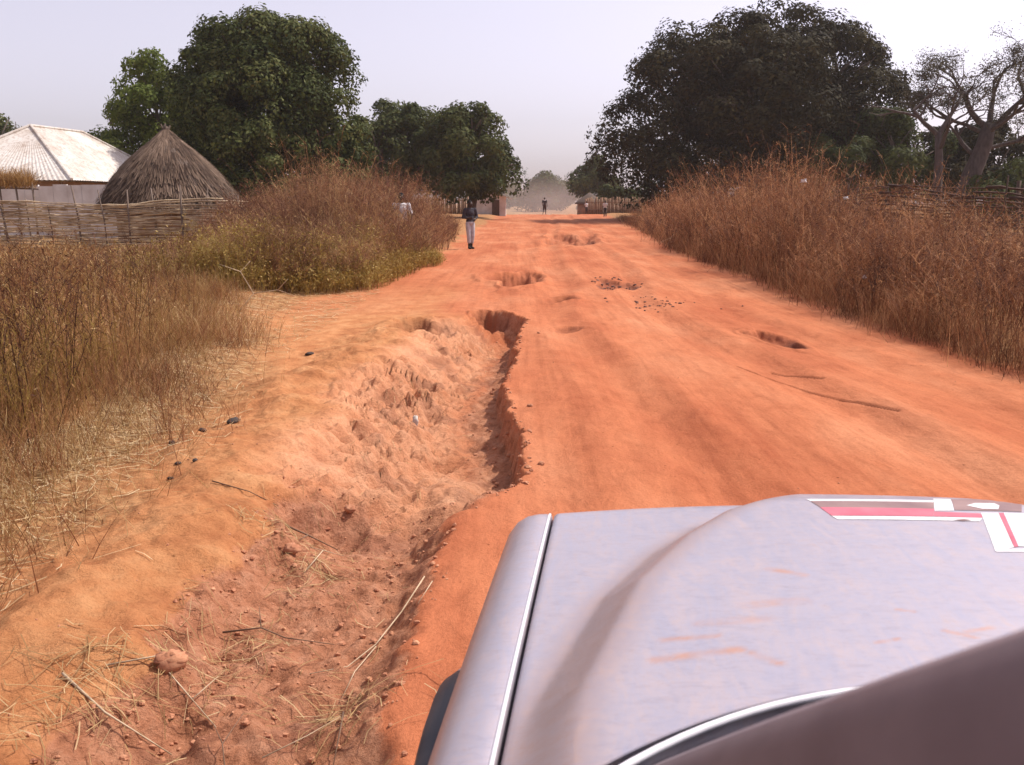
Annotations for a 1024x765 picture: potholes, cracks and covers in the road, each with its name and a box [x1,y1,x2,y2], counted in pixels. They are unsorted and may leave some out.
pothole [736,328,814,350]
pothole [480,270,547,287]
pothole [551,325,587,334]
crack [733,365,902,412]
pothole [594,277,642,291]
pothole [540,232,603,246]
pothole [542,294,584,303]
